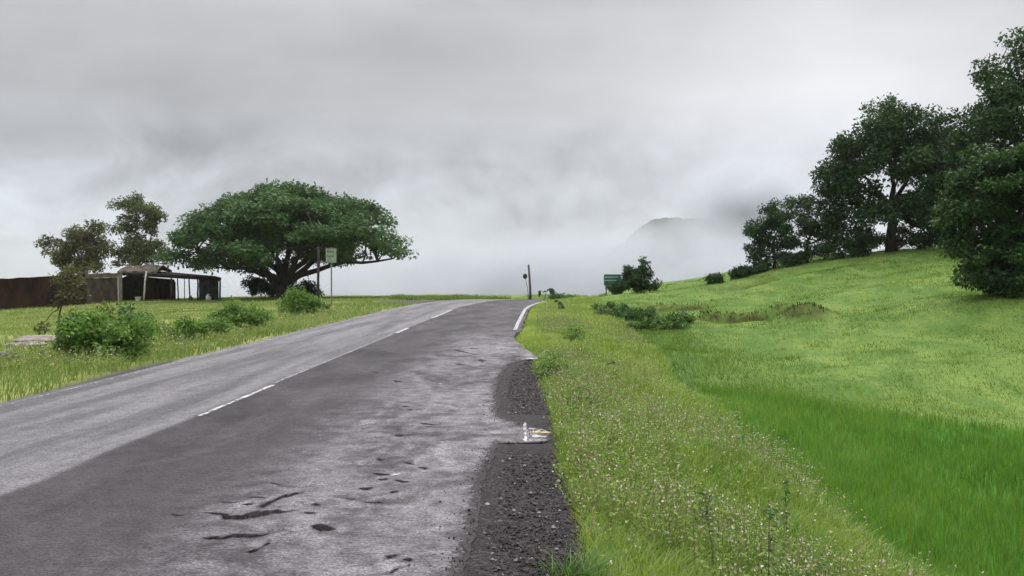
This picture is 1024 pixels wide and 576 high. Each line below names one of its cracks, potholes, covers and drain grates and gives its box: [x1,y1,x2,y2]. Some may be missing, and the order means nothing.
crack [204,483,315,554]
